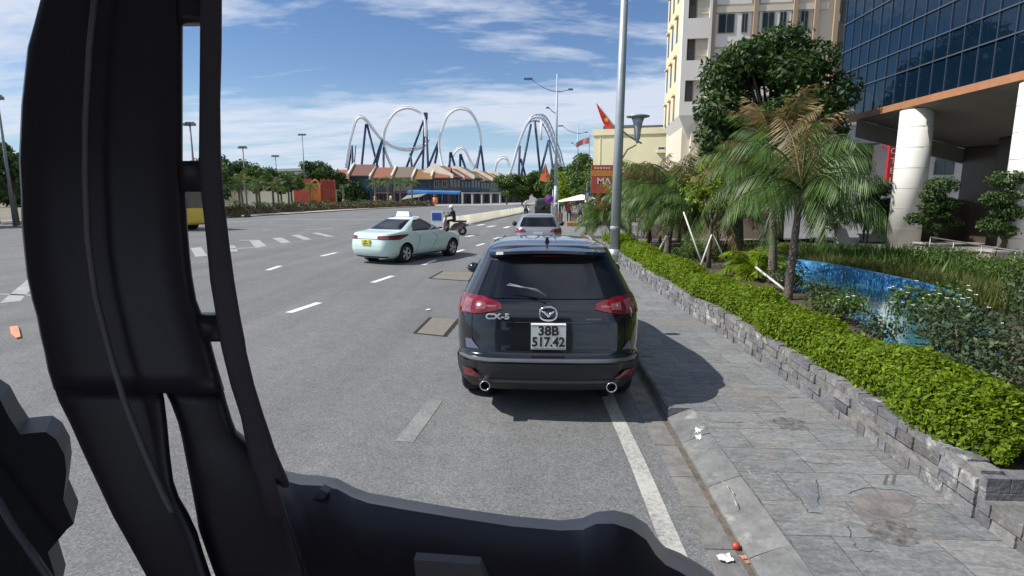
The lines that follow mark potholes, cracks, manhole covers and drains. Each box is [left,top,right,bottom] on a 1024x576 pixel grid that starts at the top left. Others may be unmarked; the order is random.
manhole cover [413,317,458,337]
manhole cover [429,271,473,281]
